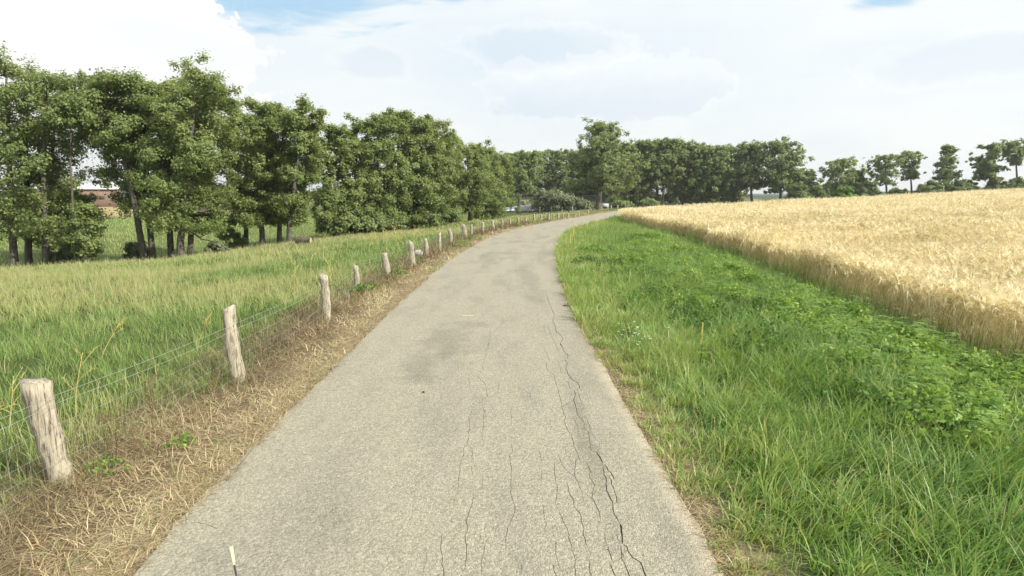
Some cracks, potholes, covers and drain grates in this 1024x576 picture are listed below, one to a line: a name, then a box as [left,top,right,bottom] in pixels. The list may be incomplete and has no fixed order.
crack [450,320,515,576]
crack [534,294,647,576]
